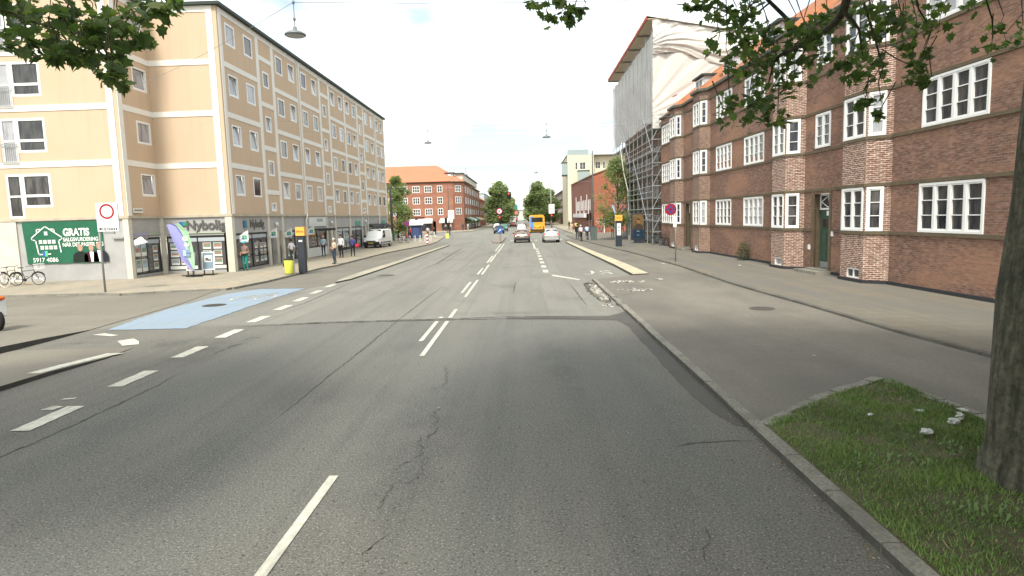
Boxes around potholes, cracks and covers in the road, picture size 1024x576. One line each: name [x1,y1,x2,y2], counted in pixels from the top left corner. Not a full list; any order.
crack [702,529,711,564]
crack [362,366,449,558]
